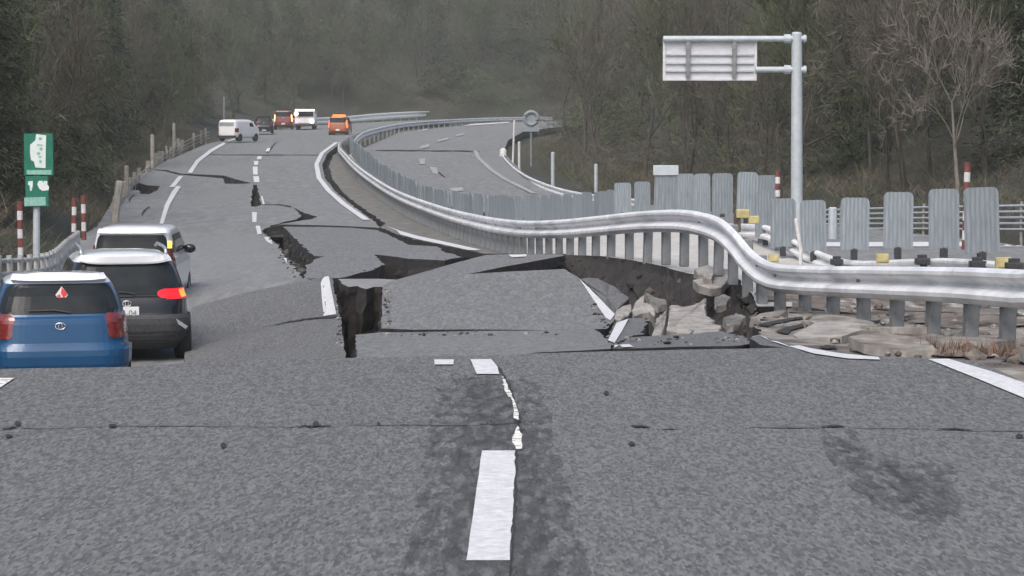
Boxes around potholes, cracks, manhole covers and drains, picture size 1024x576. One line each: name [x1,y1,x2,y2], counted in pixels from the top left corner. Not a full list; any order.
crack [128,157,612,358]
pothole [564,255,767,341]
